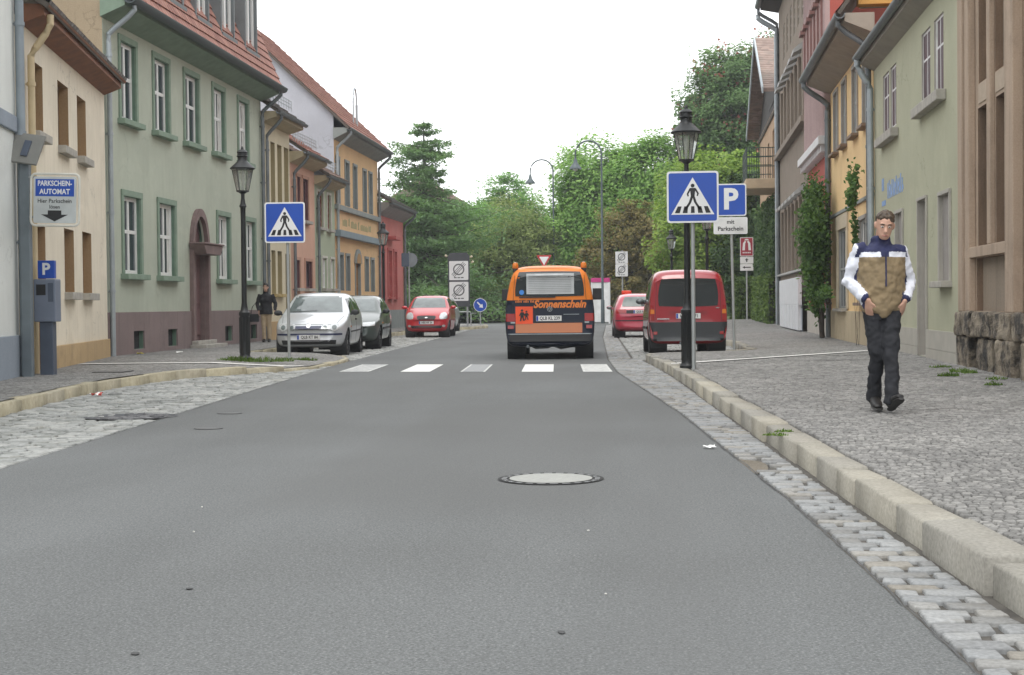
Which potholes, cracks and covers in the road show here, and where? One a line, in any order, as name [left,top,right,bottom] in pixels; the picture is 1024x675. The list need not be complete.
manhole cover [498,472,604,485]
